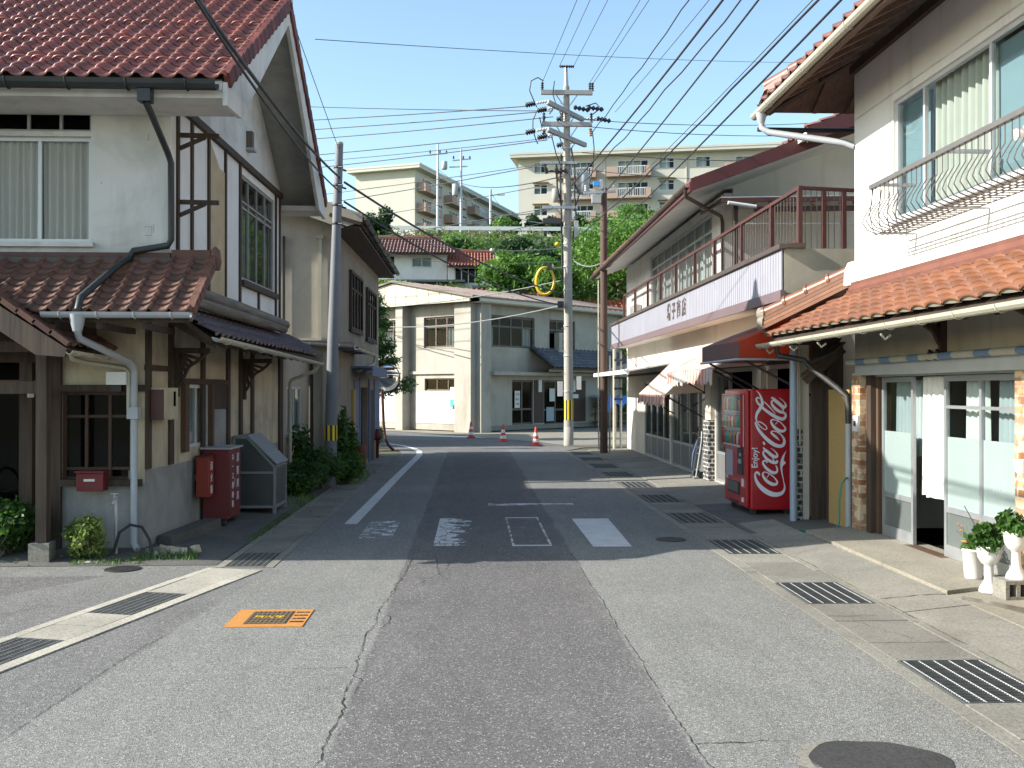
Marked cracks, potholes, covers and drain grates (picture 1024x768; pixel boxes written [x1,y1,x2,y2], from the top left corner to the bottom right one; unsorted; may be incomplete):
drain grate [88,592,186,615]
drain grate [666,513,724,523]
drain grate [638,495,684,503]
drain grate [226,553,280,567]
drain grate [898,659,1024,705]
drain grate [0,637,65,665]
manhole cover [104,565,141,573]
manhole cover [223,609,314,628]
crack [288,558,425,768]
drain grate [708,539,782,554]
drain grate [776,582,875,605]
